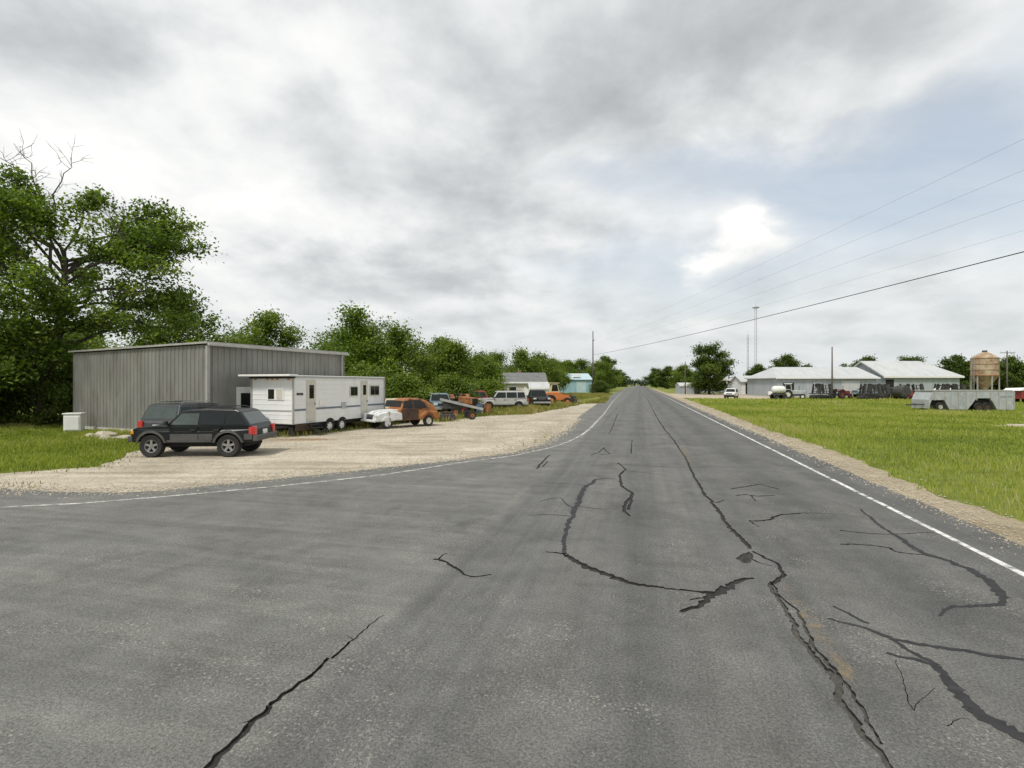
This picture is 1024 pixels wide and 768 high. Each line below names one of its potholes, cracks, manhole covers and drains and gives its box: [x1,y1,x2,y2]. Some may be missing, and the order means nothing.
crack [895,661,935,711]
crack [546,551,787,613]
pothole [736,552,754,563]
crack [203,615,383,768]
crack [732,484,930,555]
crack [592,414,667,516]
crack [433,553,492,577]
